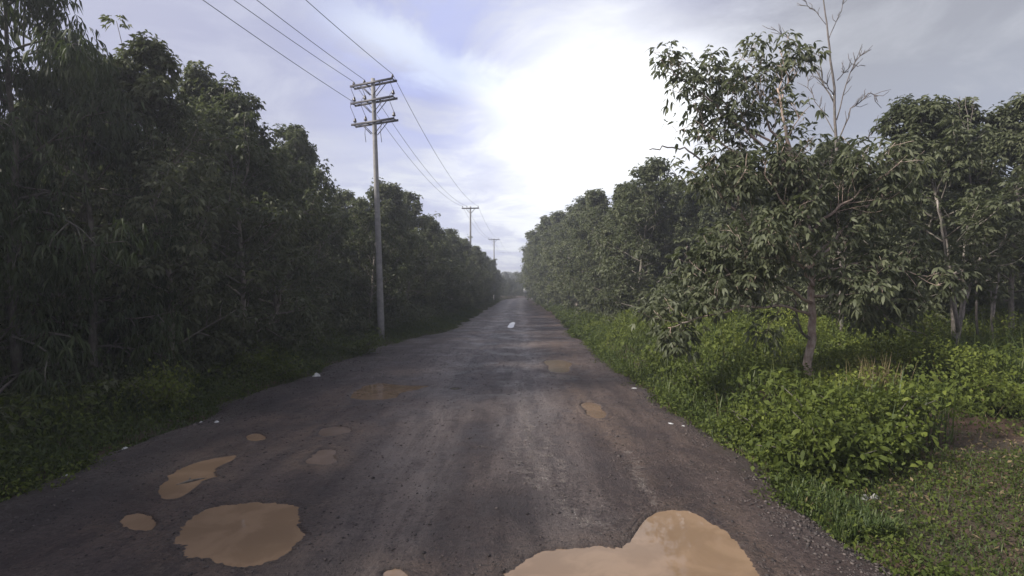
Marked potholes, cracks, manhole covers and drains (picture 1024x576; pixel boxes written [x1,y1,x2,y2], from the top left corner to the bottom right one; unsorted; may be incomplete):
pothole [107,508,168,535]
pothole [539,358,579,374]
pothole [342,381,437,402]
pothole [145,451,244,503]
pothole [307,424,361,439]
pothole [487,504,775,576]
pothole [294,446,345,468]
pothole [576,400,614,421]
pothole [156,496,319,574]
